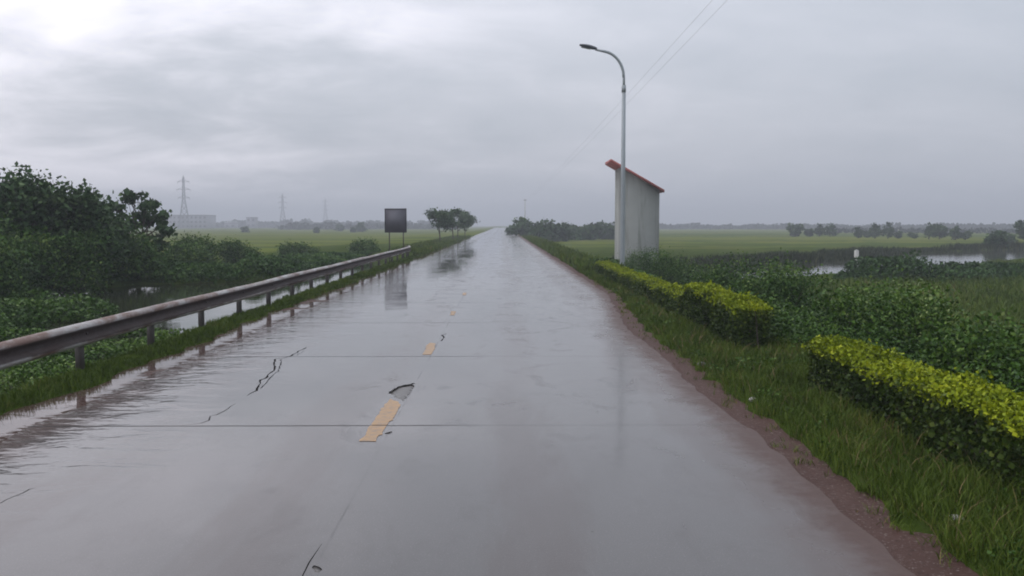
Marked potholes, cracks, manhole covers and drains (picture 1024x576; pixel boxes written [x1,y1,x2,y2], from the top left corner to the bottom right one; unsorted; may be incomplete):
pothole [388,383,414,401]
crack [189,347,307,425]
